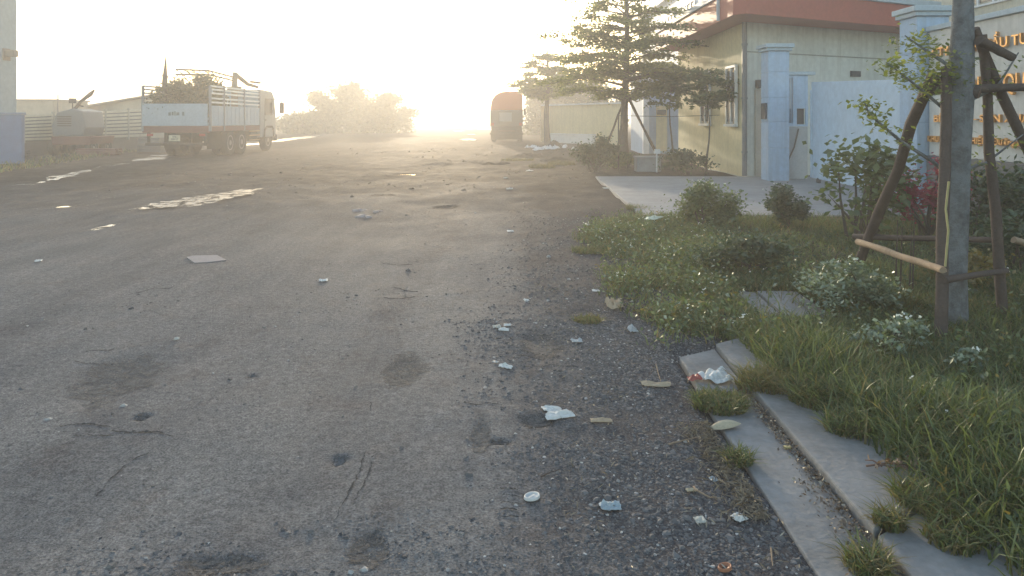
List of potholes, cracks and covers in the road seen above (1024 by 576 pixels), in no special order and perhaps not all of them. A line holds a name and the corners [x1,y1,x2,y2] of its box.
pothole [379,352,429,389]
crack [59,423,170,436]
pothole [345,529,392,569]
pothole [469,415,491,454]
